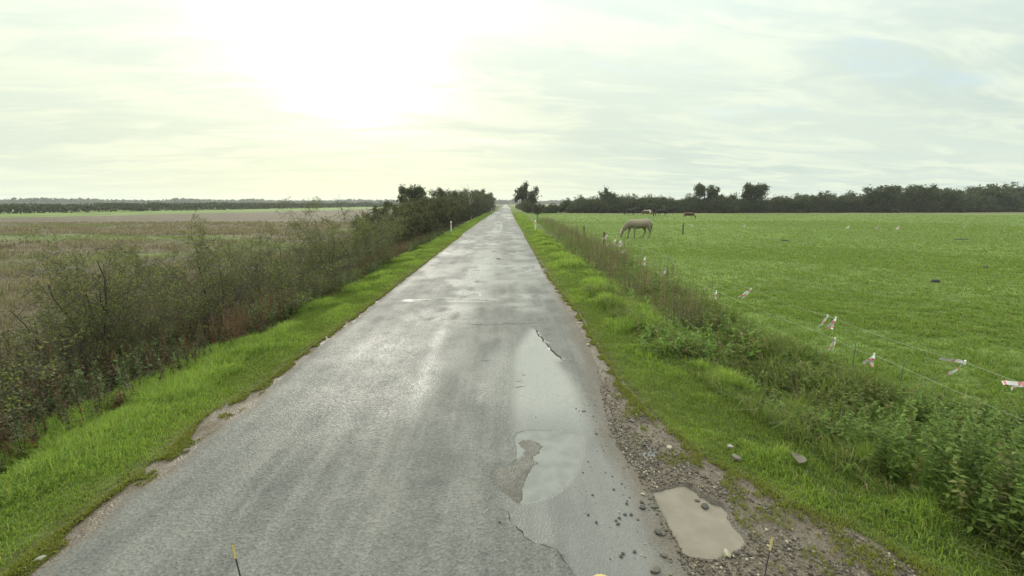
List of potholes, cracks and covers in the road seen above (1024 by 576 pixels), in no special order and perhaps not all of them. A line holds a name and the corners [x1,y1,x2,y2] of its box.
crack [474,323,562,397]
pothole [495,430,587,505]
